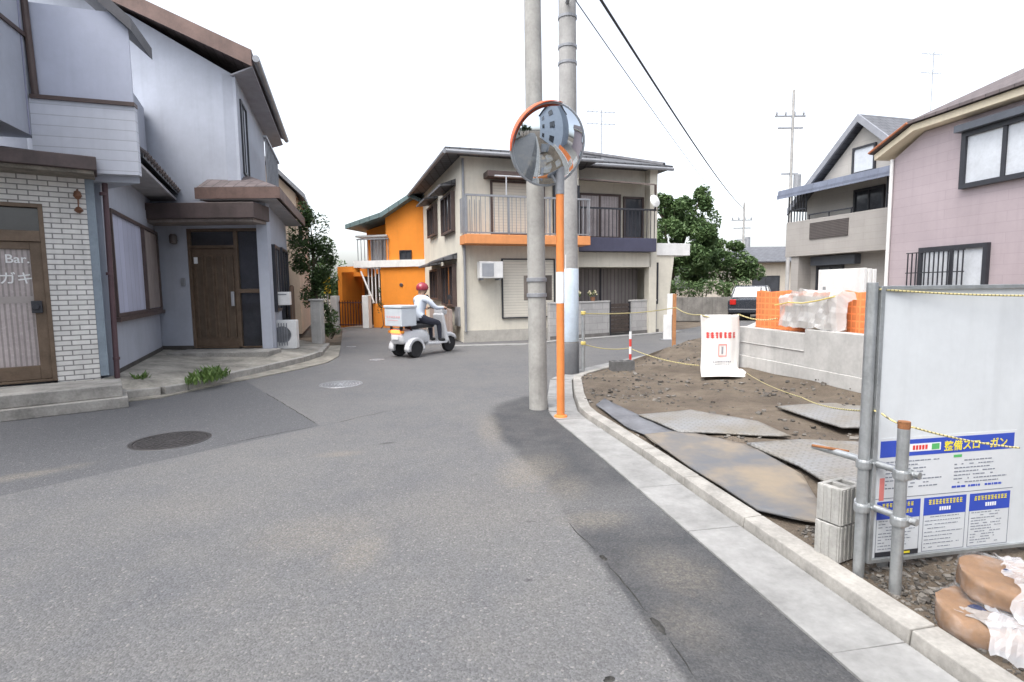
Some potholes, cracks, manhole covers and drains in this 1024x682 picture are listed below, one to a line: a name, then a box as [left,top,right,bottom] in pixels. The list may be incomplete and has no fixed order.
pothole [650,617,666,635]
manhole cover [127,431,212,451]
